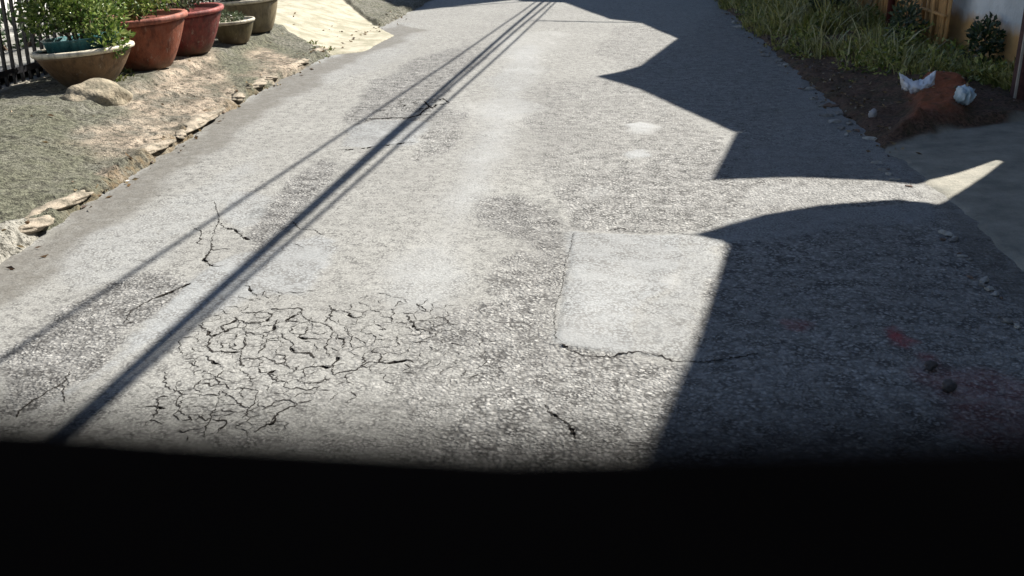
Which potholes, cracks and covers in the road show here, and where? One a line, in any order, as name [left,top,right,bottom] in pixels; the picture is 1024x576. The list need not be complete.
crack [144,290,503,419]
crack [545,405,575,431]
crack [194,202,249,266]
crack [30,371,71,402]
crack [553,233,758,362]
crack [123,283,190,323]
crack [368,97,448,119]
